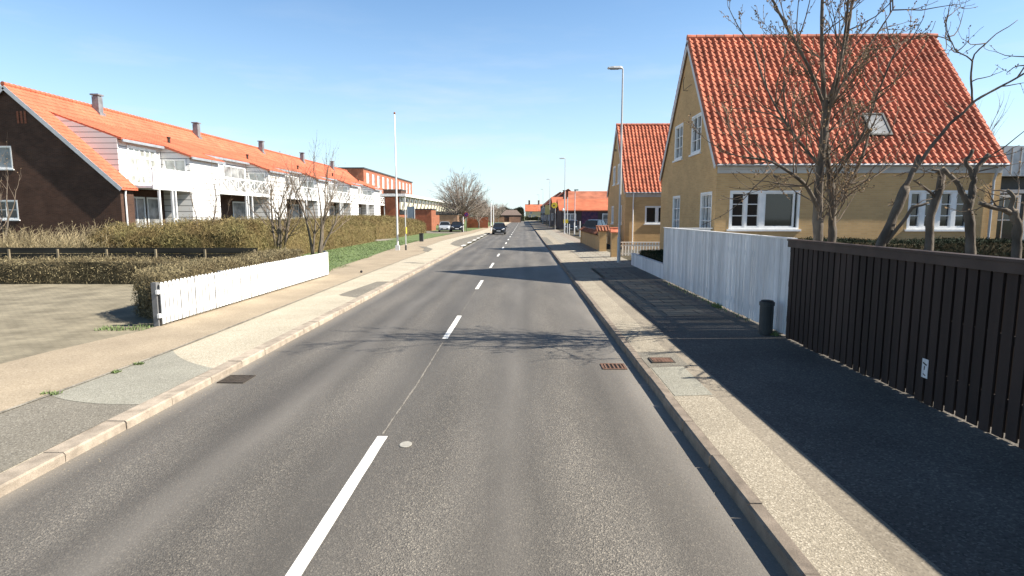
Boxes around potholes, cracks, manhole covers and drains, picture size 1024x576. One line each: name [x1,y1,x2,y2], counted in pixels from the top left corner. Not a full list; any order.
drain grate [217,375,256,383]
